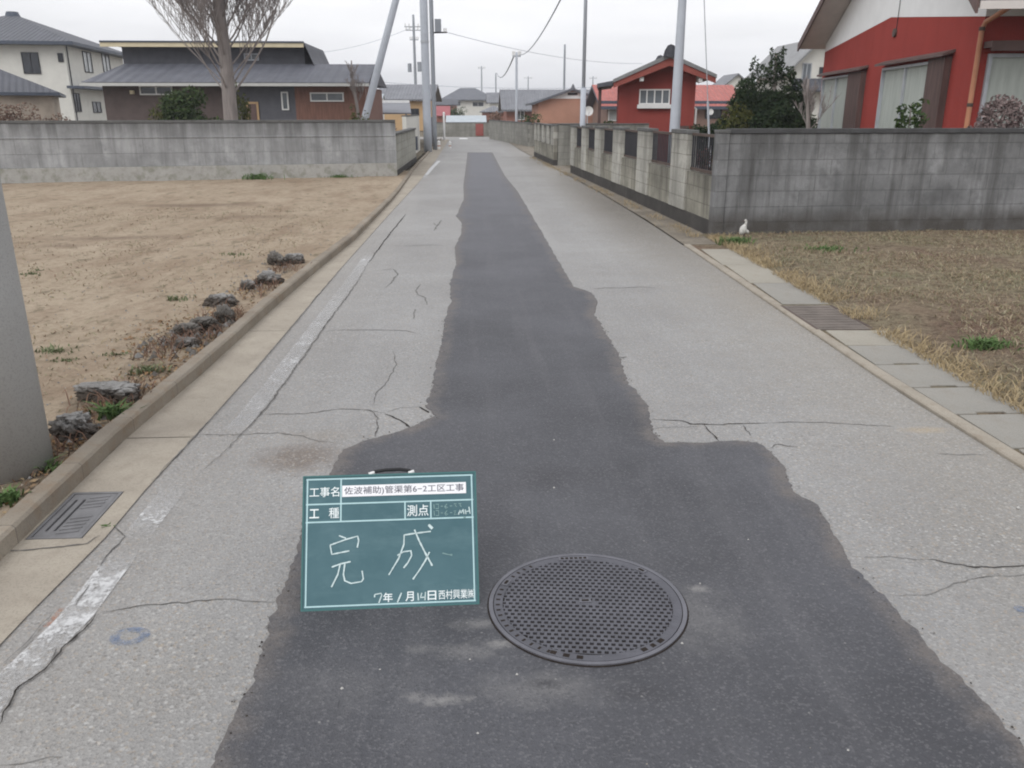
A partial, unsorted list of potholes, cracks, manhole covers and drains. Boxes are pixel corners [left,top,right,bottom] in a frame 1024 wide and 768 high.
crack [197,215,429,468]
crack [10,537,96,551]
crack [0,586,275,723]
drain grate [26,492,123,540]
crack [657,419,886,441]
manhole cover [487,554,689,667]
crack [853,556,1024,596]
